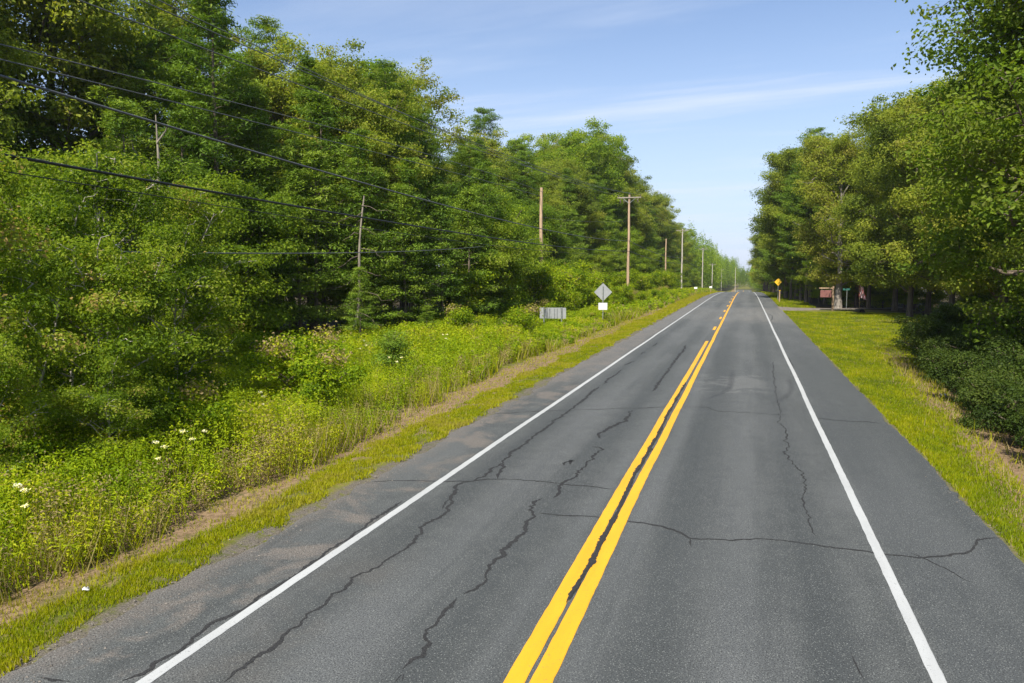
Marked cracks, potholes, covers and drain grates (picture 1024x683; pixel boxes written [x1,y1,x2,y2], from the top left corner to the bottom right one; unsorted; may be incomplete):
crack [122,343,1000,682]
